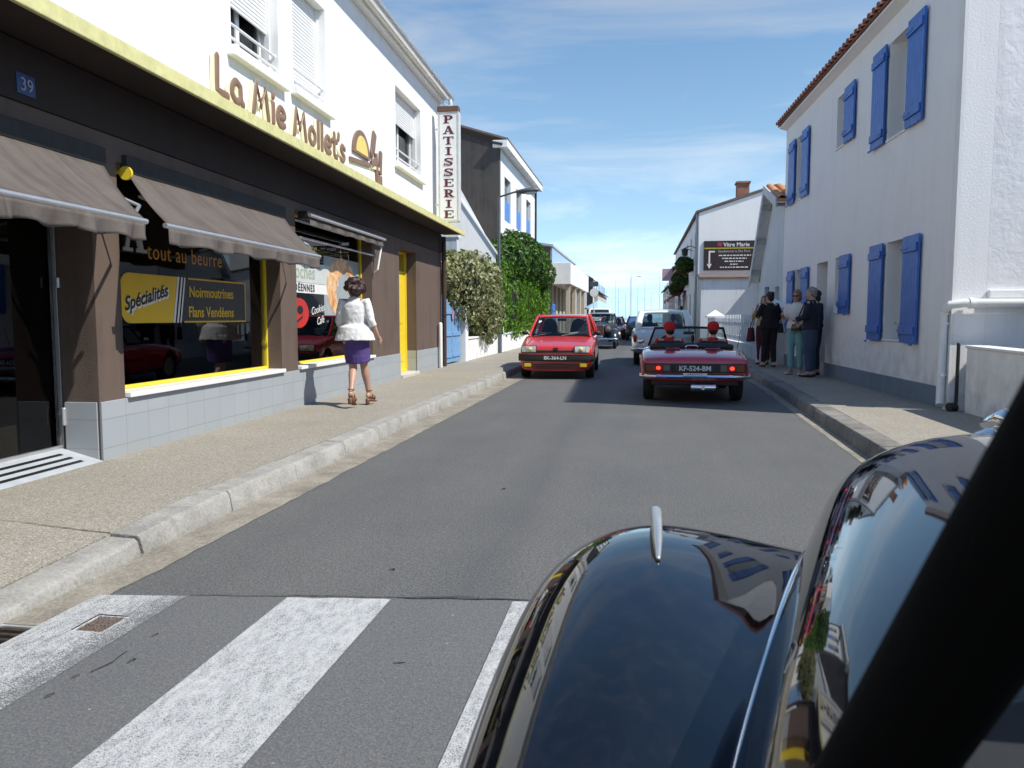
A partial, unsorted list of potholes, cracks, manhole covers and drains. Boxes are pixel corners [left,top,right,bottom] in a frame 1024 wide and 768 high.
drain grate [0,624,39,644]
